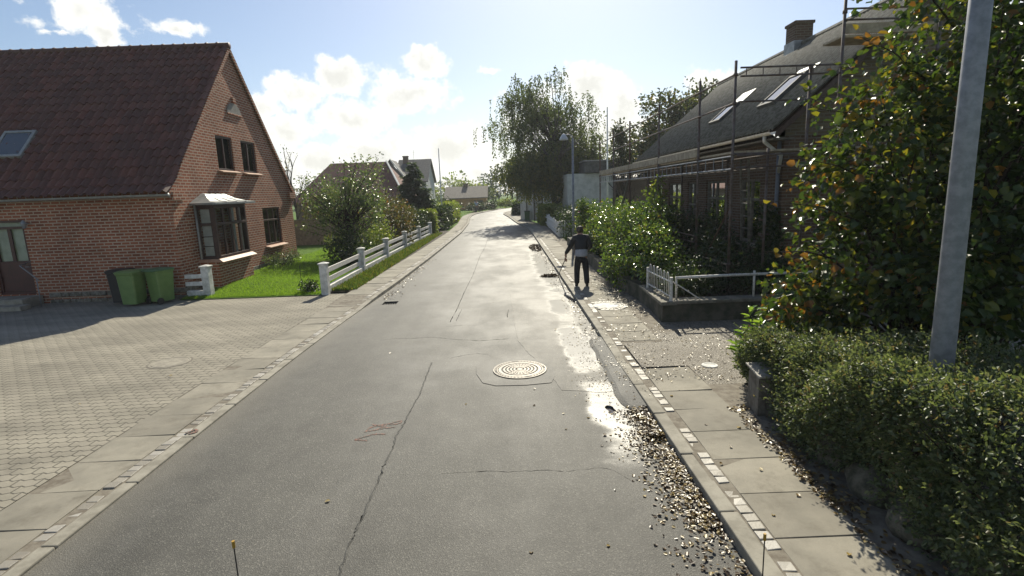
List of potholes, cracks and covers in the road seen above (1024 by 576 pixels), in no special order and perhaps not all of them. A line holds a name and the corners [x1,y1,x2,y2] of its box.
manhole cover [493,360,547,379]
crack [338,362,628,576]
manhole cover [146,356,193,369]
